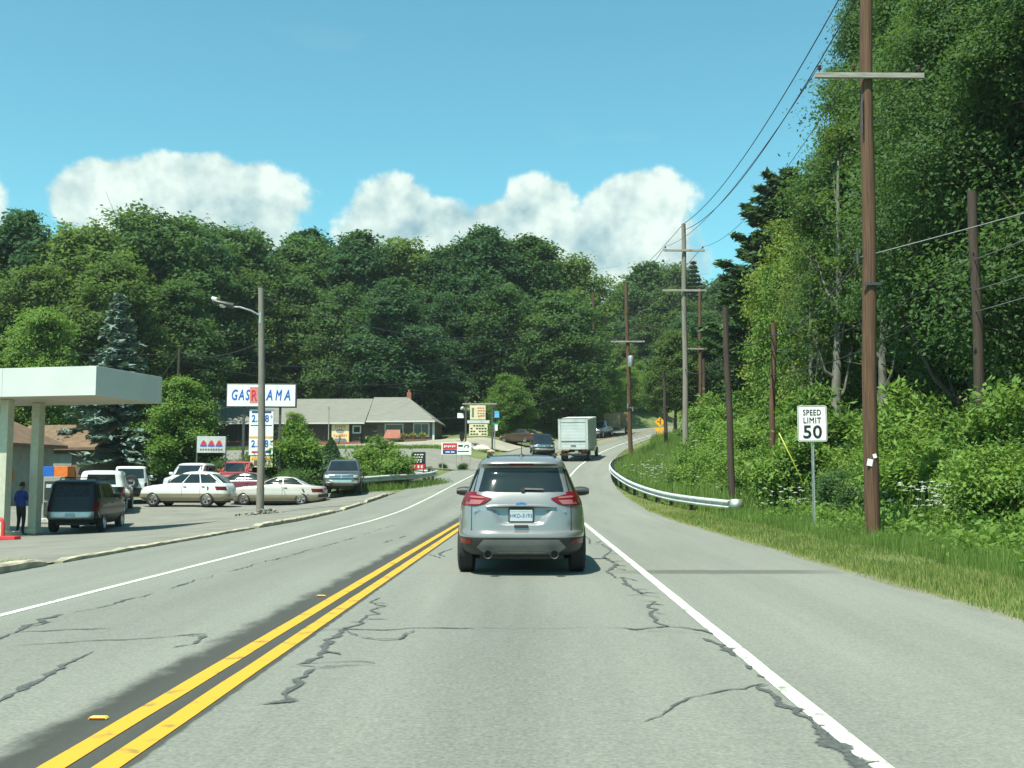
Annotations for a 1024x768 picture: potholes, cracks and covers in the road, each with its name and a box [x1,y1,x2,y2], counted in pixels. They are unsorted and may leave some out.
crack [645,683,763,721]
crack [0,525,391,701]
